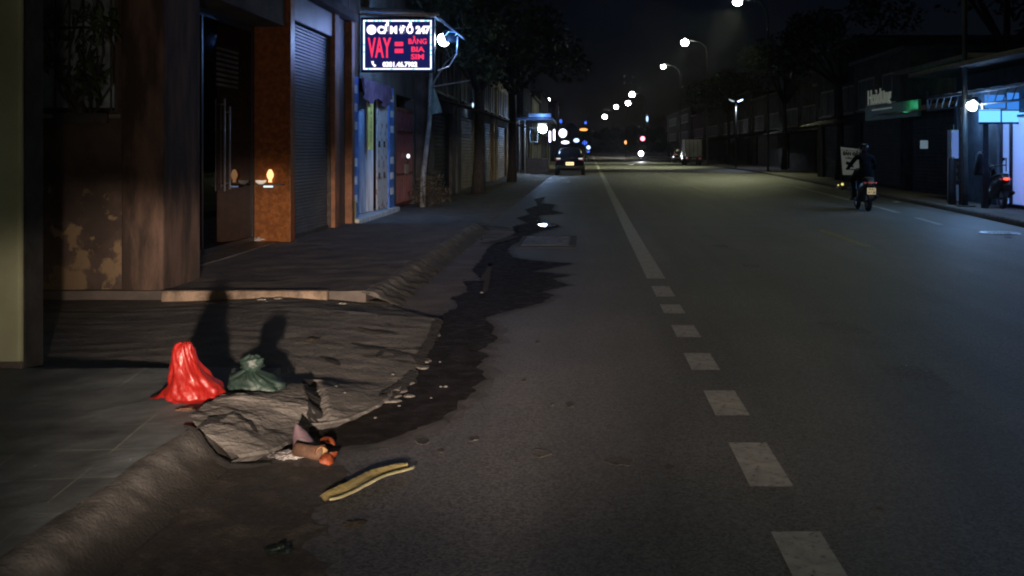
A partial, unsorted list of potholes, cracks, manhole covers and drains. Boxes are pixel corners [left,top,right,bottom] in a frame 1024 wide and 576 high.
manhole cover [515,236,577,248]
pothole [530,449,552,458]
pothole [603,458,634,466]
